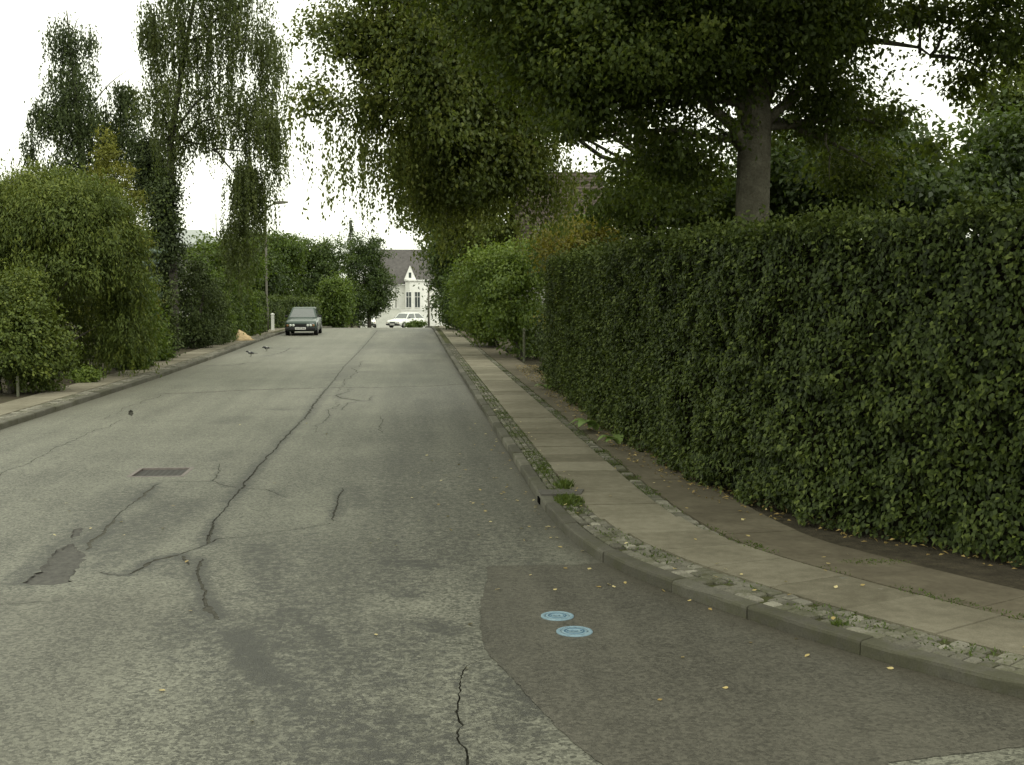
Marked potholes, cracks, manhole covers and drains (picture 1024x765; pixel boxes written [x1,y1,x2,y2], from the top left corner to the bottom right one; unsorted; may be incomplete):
manhole cover [556,626,593,637]
crack [455,643,486,765]
crack [86,484,158,550]
manhole cover [541,611,574,621]
pothole [23,543,87,585]
